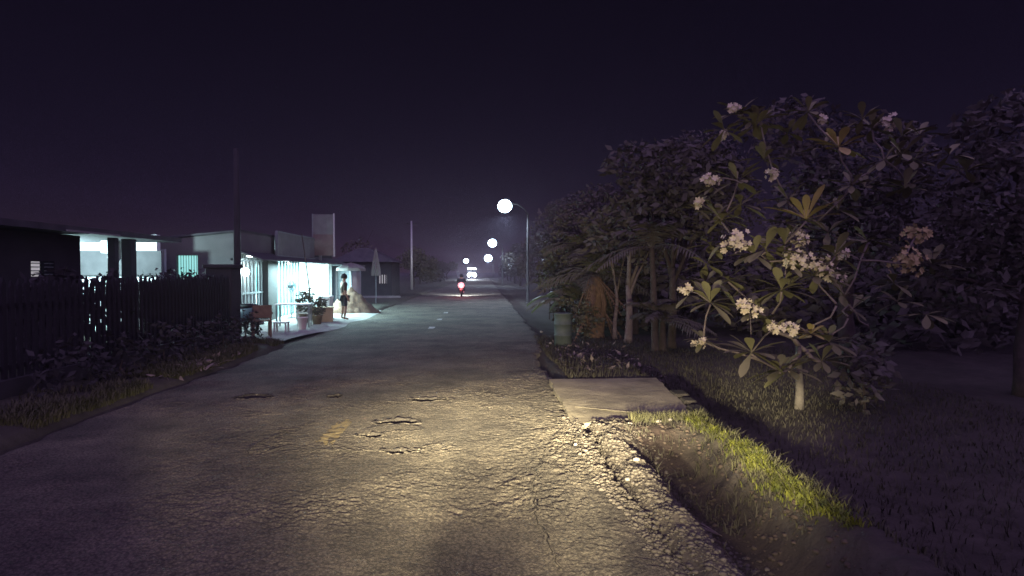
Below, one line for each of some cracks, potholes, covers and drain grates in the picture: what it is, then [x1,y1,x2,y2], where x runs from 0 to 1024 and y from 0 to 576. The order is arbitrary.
crack [496,404,661,571]
pothole [371,417,422,425]
